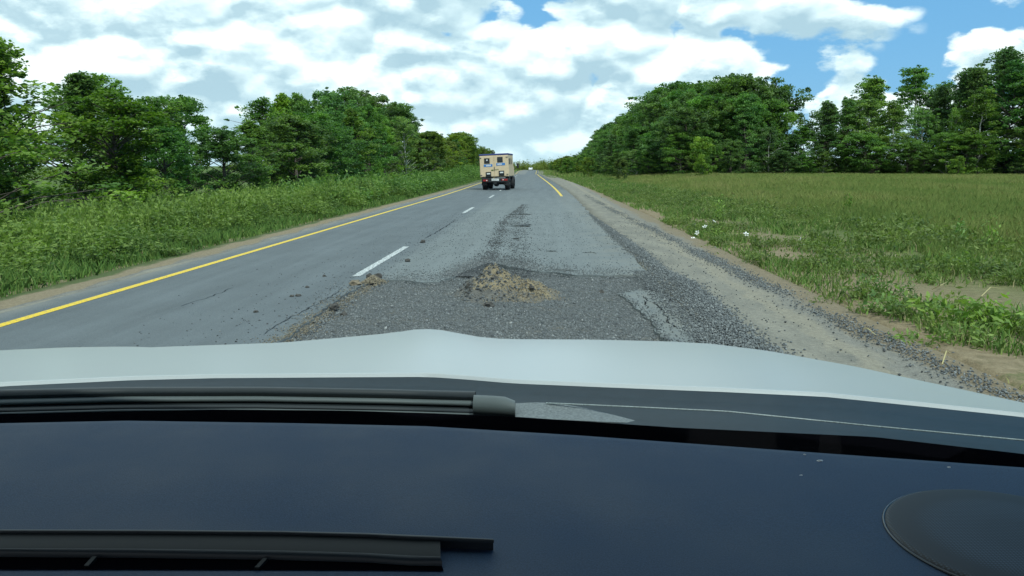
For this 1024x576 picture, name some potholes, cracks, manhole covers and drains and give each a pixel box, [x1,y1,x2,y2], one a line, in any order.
pothole [296,269,704,341]
